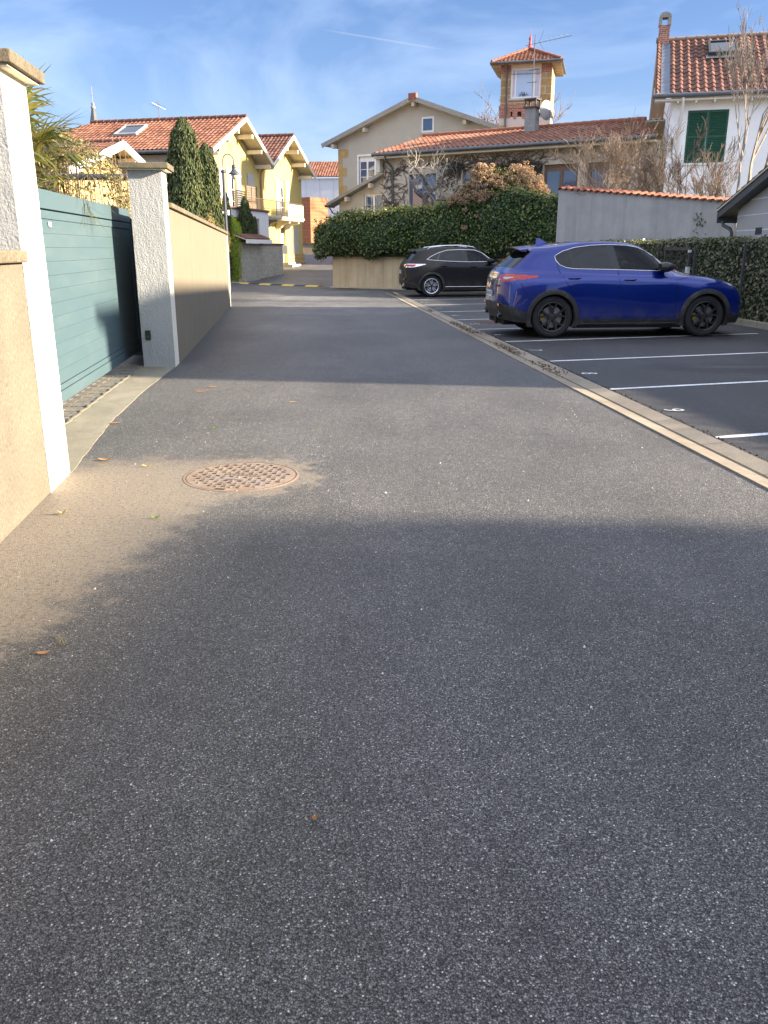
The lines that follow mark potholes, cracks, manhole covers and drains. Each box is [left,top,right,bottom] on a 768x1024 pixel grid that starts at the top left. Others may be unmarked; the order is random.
manhole cover [183,462,299,492]
